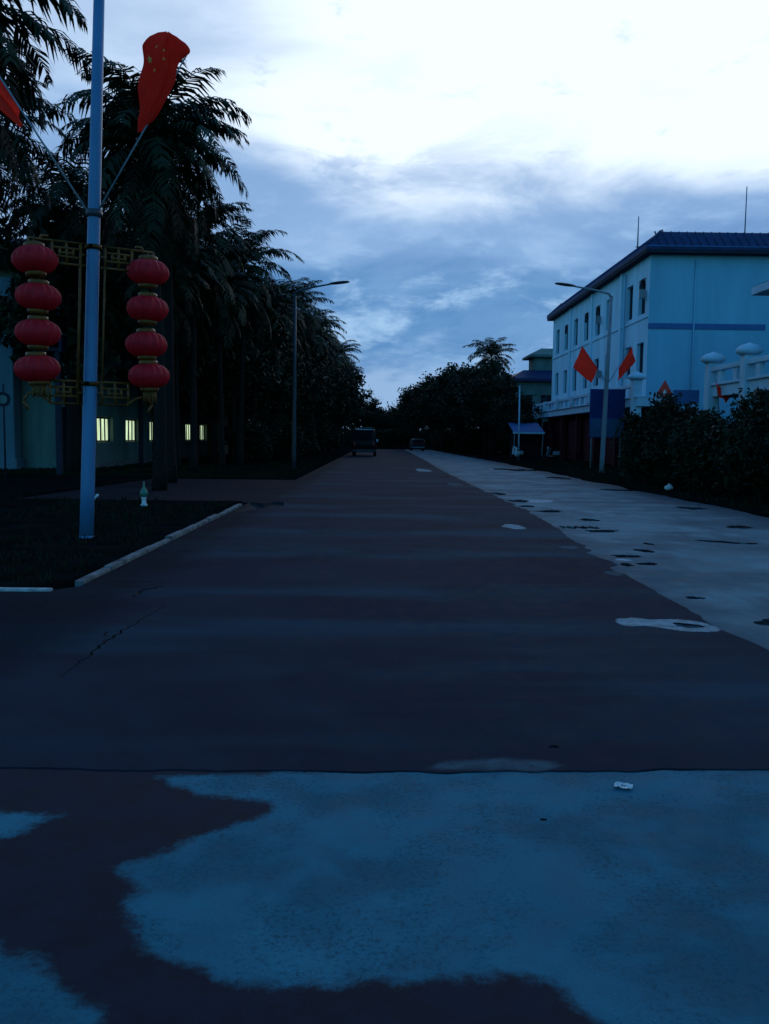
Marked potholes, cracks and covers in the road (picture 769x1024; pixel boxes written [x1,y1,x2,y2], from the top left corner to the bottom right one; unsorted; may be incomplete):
crack [60,581,164,678]
